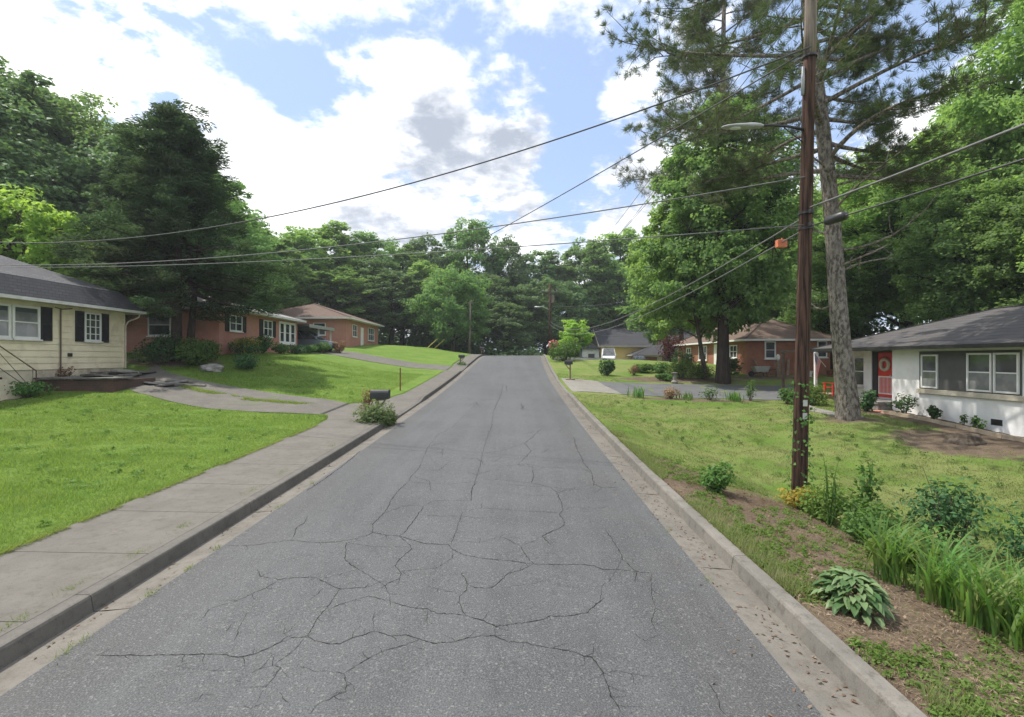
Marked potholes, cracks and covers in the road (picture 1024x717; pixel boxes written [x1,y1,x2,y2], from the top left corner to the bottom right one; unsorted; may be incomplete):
crack [102,385,664,712]
